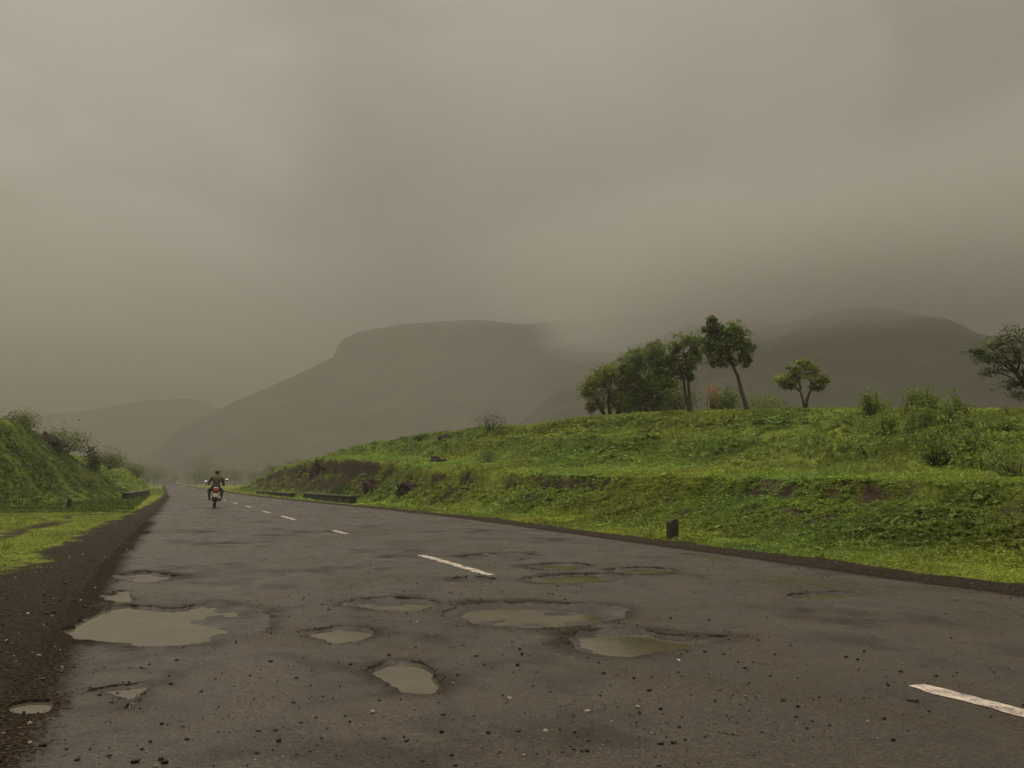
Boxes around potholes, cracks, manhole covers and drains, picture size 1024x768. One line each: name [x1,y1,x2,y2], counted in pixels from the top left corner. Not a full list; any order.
pothole [520,573,624,583]
pothole [98,590,133,603]
pothole [566,627,736,657]
pothole [339,596,440,612]
pothole [110,571,179,583]
pothole [301,625,376,644]
pothole [441,601,629,628]
pothole [366,660,442,694]
pothole [6,699,56,714]
pothole [87,682,151,709]
pothole [60,601,273,647]
pothole [787,591,857,599]
